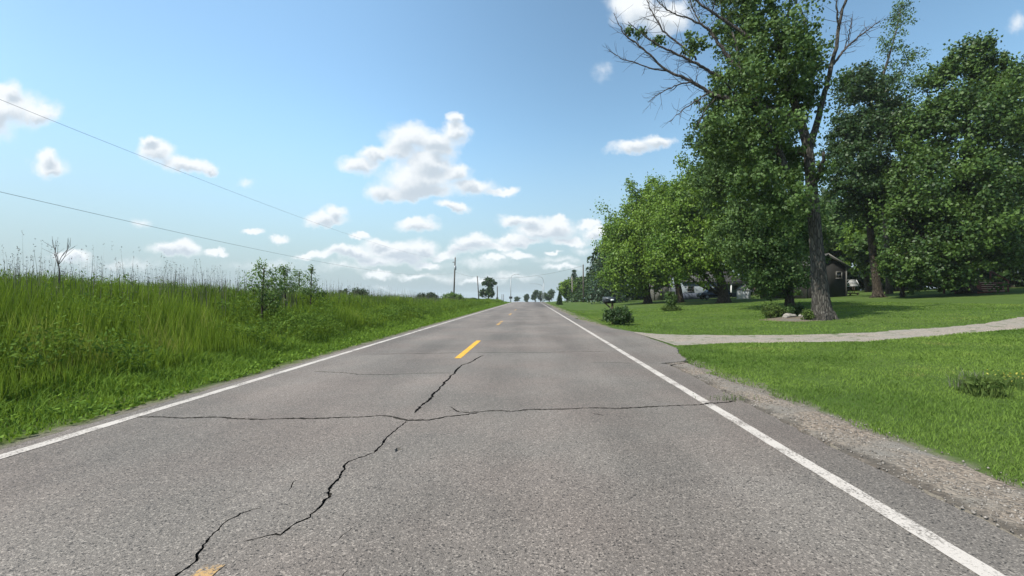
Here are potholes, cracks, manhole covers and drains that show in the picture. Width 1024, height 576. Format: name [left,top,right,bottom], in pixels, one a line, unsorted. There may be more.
crack [148,351,732,576]
